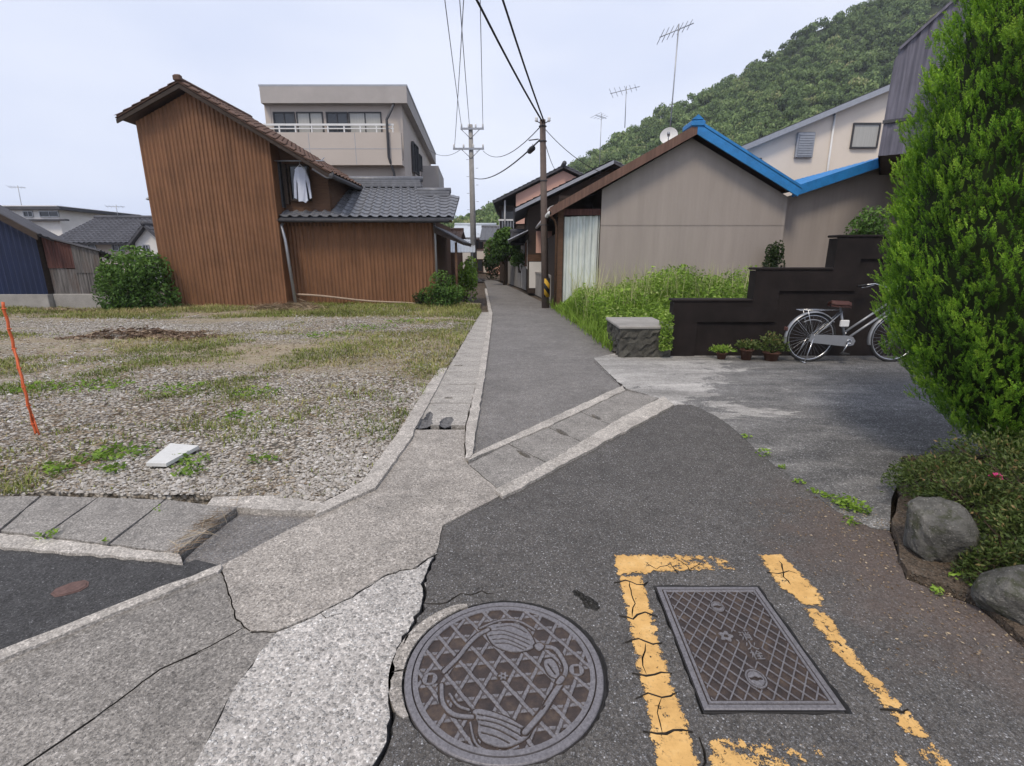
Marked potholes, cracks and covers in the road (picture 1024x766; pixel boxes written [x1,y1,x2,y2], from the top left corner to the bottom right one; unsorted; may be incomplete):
manhole cover [404,602,604,766]
manhole cover [656,587,846,715]
crack [23,554,437,766]
crack [392,559,852,766]
